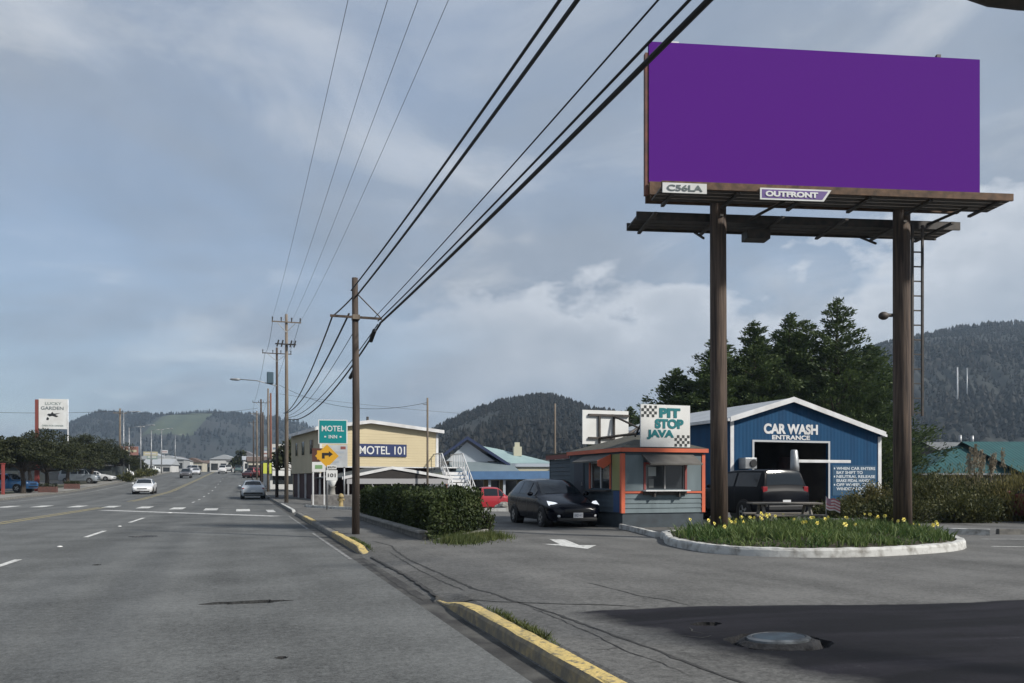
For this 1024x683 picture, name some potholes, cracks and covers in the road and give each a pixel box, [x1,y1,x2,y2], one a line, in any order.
pothole [266,654,297,662]
pothole [678,619,737,629]
